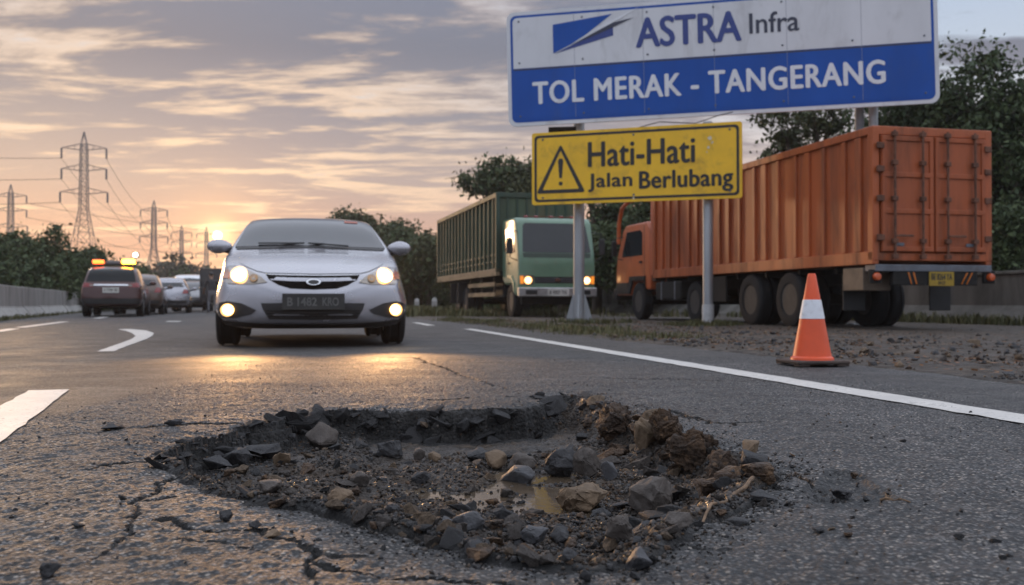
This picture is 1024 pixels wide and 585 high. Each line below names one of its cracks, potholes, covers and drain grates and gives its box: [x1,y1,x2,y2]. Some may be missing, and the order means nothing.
crack [84,461,515,585]
crack [415,357,513,401]
pothole [155,396,784,575]
pothole [799,468,900,510]
